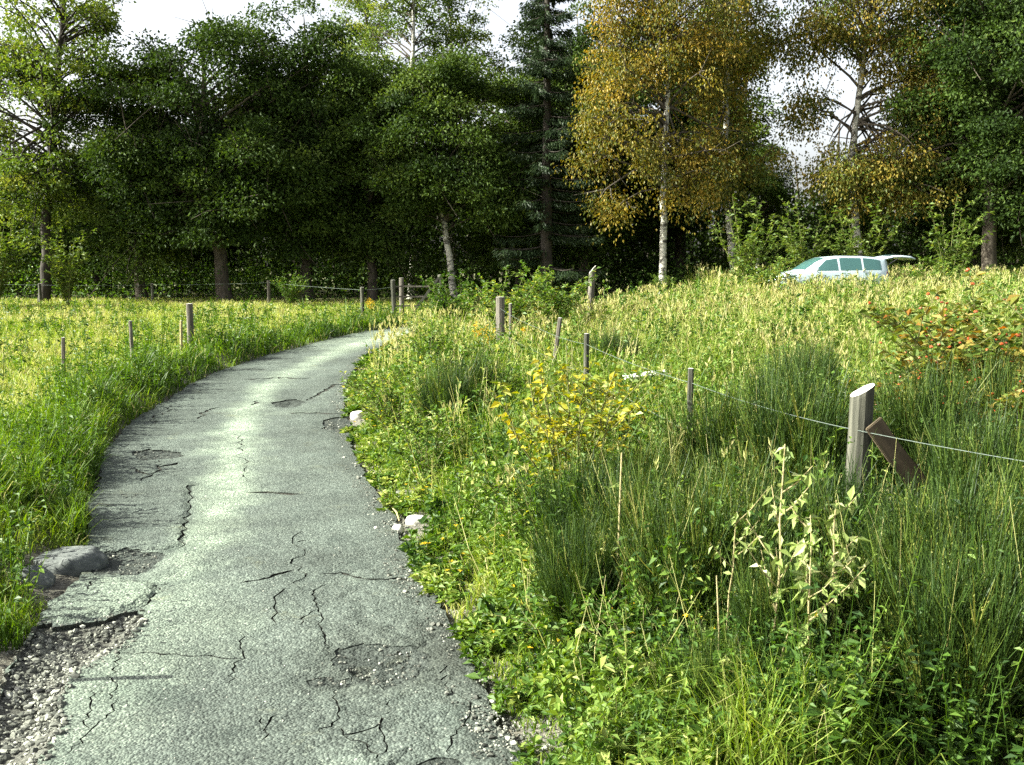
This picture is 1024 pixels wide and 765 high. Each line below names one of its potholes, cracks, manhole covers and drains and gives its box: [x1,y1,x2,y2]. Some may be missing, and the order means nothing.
pothole [331,643,429,690]
pothole [132,449,184,461]
crack [319,691,392,753]
pothole [91,547,165,576]
crack [178,486,193,548]
crack [247,369,344,414]
crack [121,460,178,480]
crack [71,633,246,751]
pothole [272,400,305,408]
pothole [321,417,352,433]
crack [245,529,411,650]
